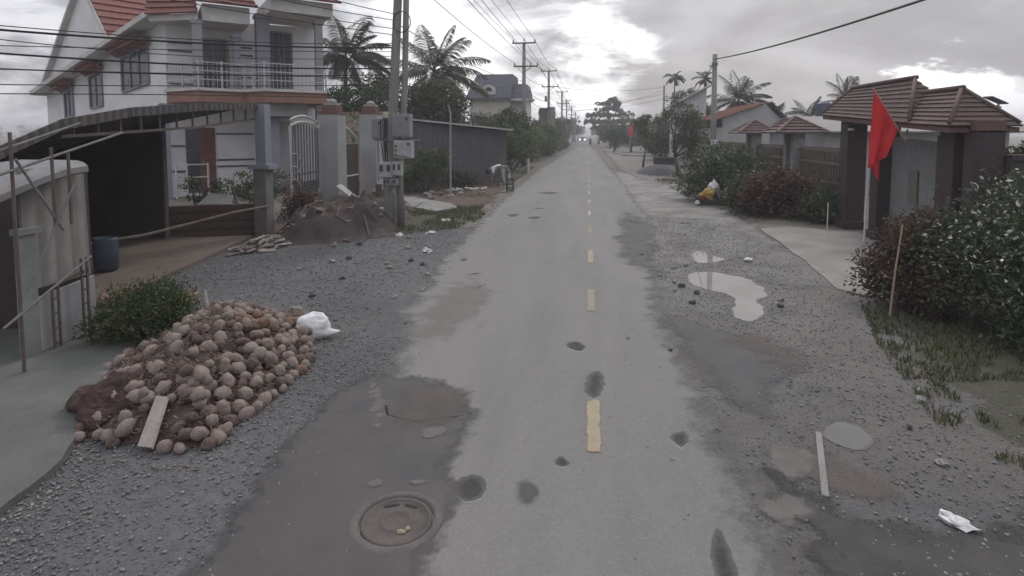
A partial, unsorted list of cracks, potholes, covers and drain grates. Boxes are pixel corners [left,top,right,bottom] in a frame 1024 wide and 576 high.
pothole [670,430,689,448]
pothole [584,371,606,399]
pothole [710,528,738,576]
pothole [566,341,586,351]
manhole cover [349,491,443,554]
pothole [555,456,570,467]
pothole [456,474,486,502]
